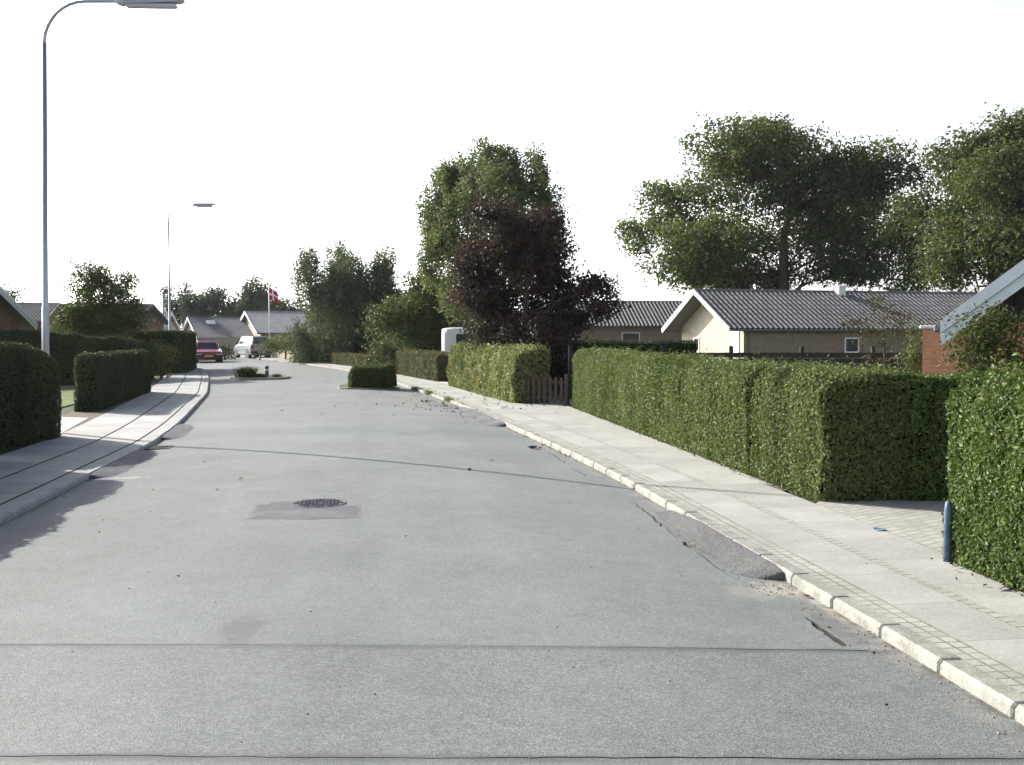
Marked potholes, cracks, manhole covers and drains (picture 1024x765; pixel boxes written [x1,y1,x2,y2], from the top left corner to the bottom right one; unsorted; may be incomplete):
manhole cover [292,499,347,508]
crack [806,618,847,646]
